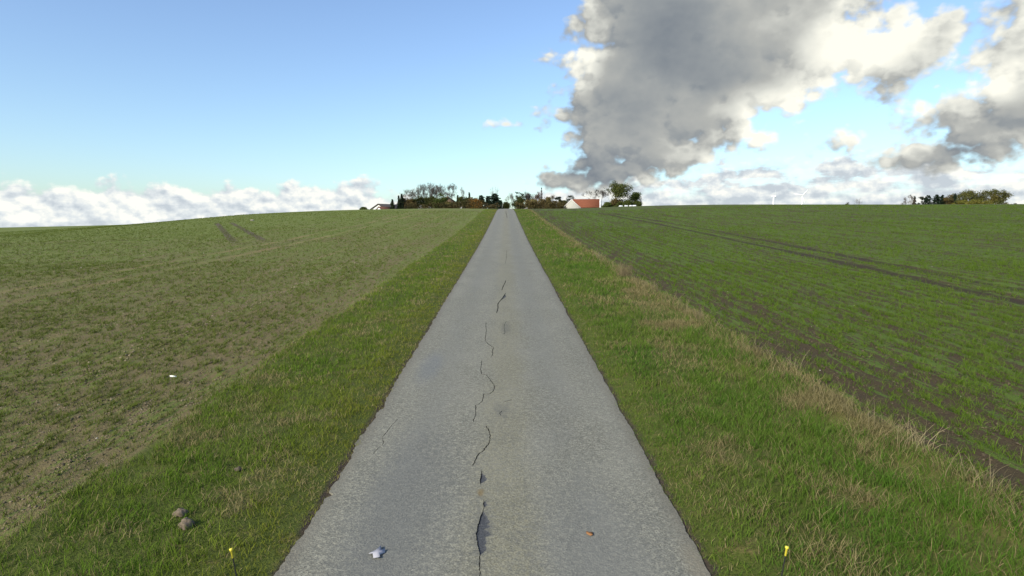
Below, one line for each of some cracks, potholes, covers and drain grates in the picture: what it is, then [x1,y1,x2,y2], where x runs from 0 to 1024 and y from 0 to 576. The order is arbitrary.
crack [472,280,512,576]
